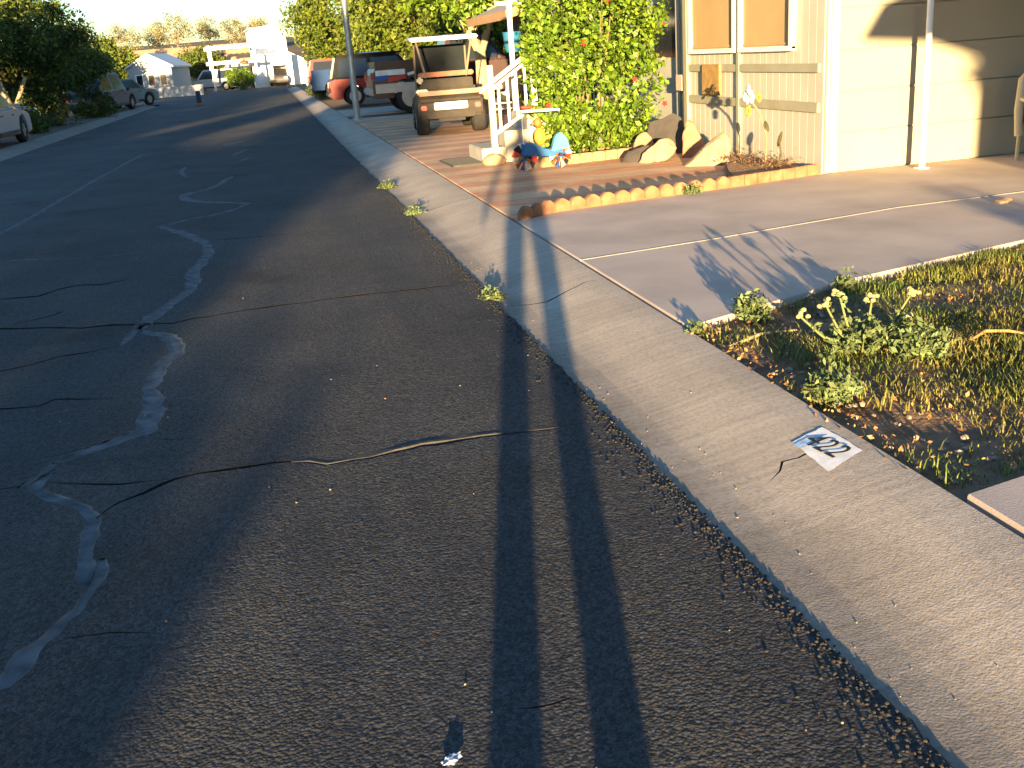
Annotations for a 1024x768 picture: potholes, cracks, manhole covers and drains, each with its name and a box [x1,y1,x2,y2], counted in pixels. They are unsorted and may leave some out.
crack [517,697,583,709]
crack [0,140,588,690]
